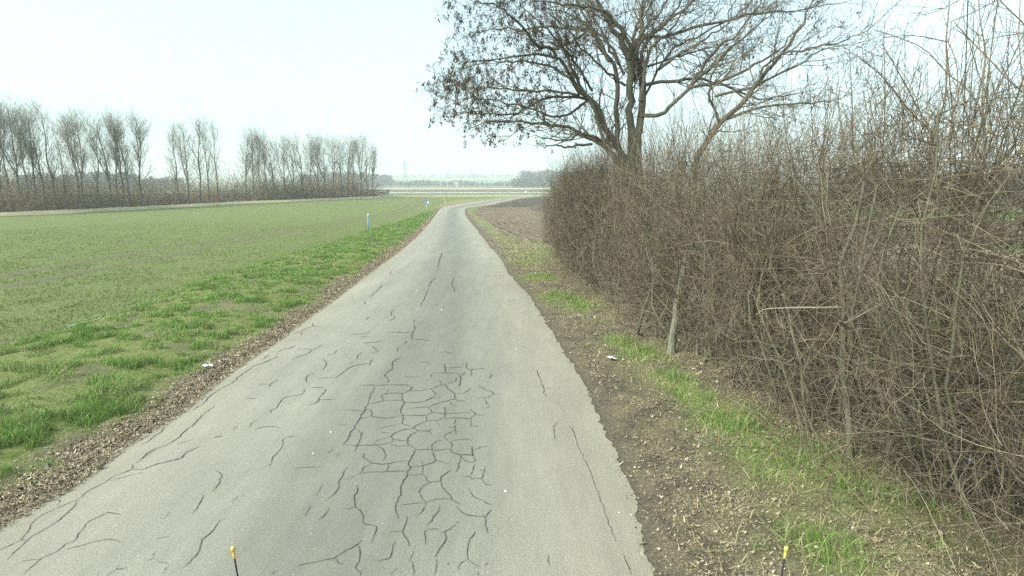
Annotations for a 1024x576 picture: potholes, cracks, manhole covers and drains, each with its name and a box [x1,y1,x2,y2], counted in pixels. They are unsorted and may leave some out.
crack [2,253,493,575]
